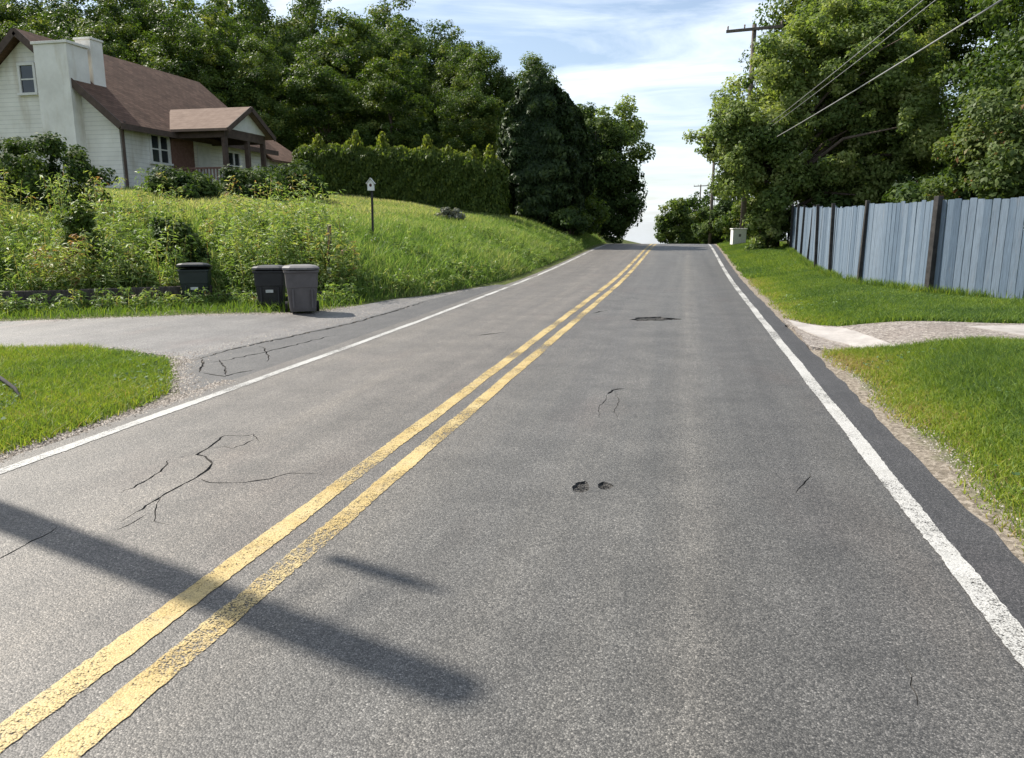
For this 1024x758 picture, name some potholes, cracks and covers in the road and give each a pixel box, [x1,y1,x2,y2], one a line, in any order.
crack [114,434,322,531]
crack [905,662,918,705]
crack [197,303,419,377]
pothole [572,481,589,493]
crack [0,527,57,559]
